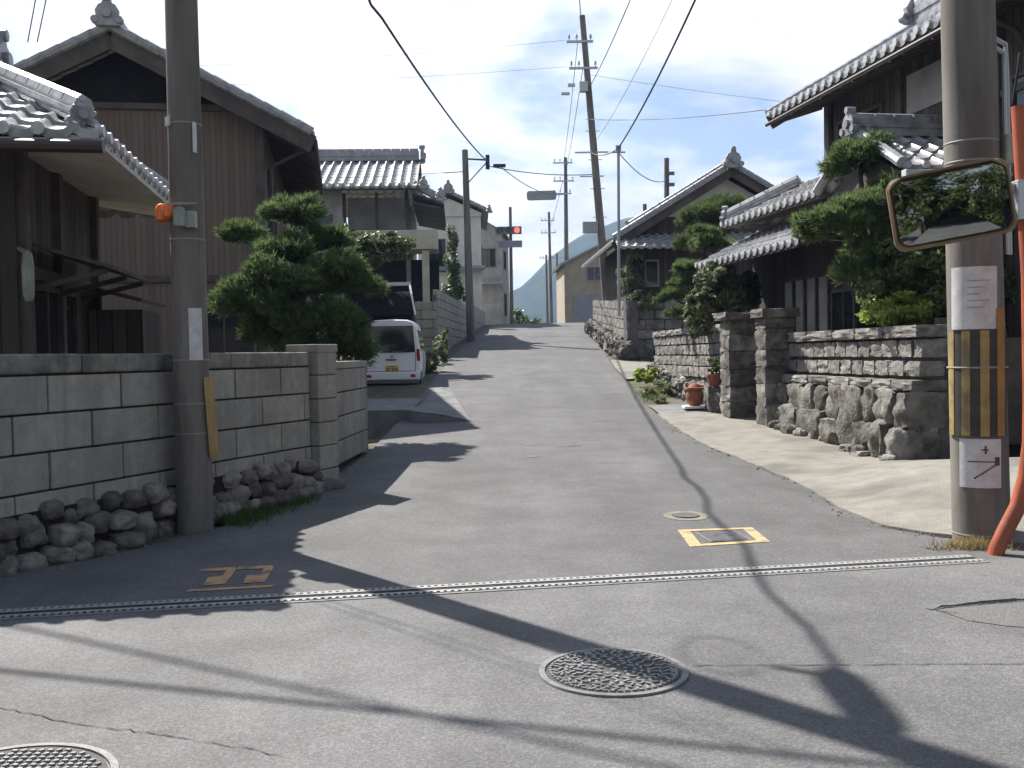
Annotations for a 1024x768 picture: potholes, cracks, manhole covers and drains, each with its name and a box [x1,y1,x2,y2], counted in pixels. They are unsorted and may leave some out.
manhole cover [0,742,119,768]
utility cover [663,511,709,520]
manhole cover [538,648,689,698]
utility cover [694,530,752,542]
crack [0,707,269,754]
